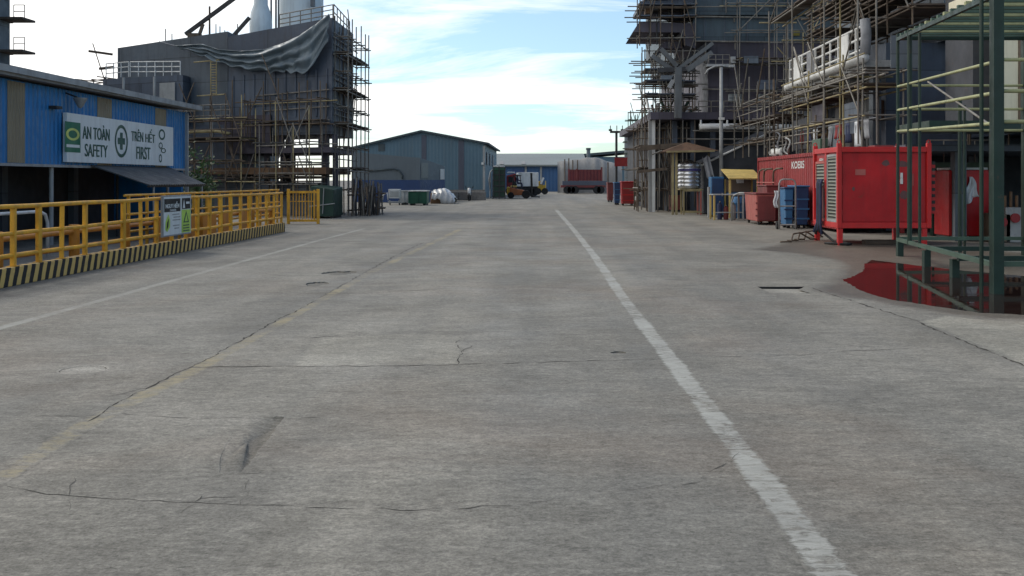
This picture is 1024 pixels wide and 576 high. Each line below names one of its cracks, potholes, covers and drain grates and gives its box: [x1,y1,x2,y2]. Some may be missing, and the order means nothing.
pothole [219,416,284,475]
crack [9,479,552,511]
